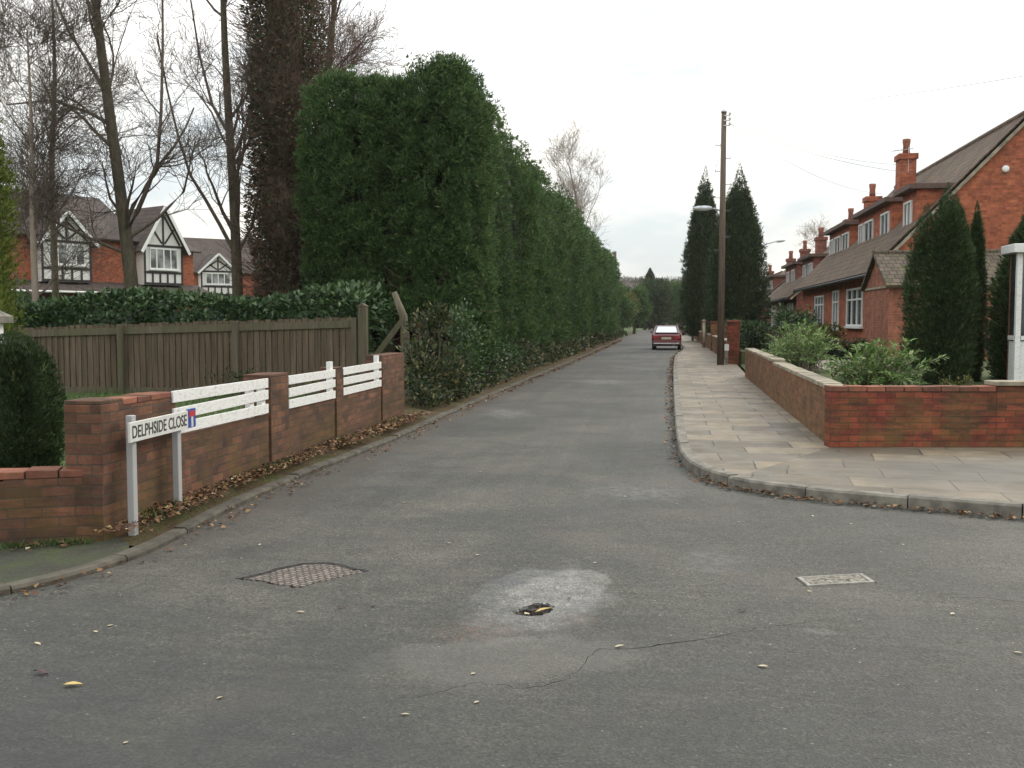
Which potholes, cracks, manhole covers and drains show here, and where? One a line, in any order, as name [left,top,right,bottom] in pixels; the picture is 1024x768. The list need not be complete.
crack [384,618,840,702]
manhole cover [235,562,369,588]
manhole cover [795,573,877,587]
pothole [512,603,556,616]
